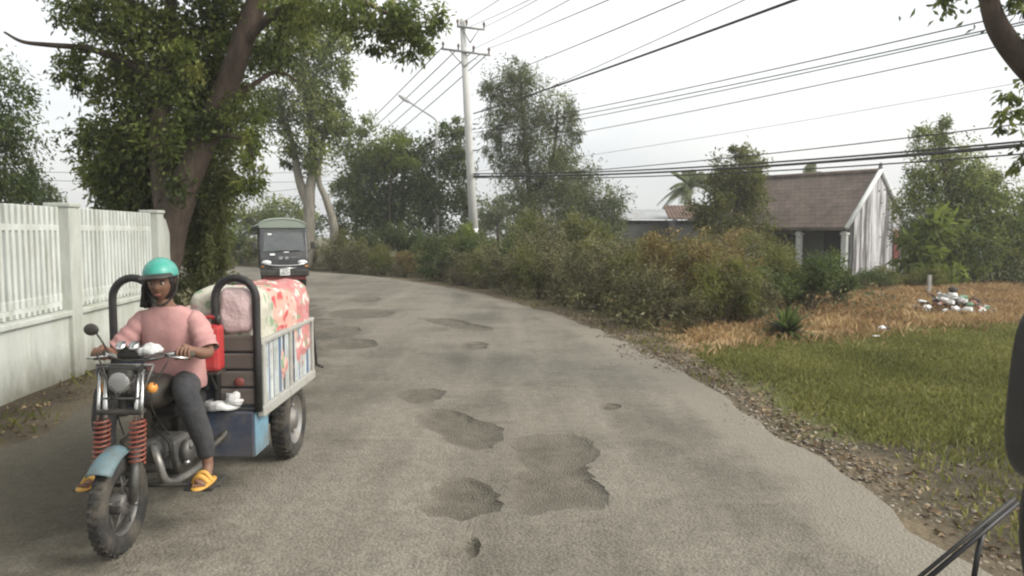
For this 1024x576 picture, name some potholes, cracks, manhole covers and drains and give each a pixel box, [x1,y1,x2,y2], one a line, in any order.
pothole [395,388,446,404]
pothole [425,318,495,332]
pothole [324,309,394,319]
pothole [414,408,504,451]
pothole [460,537,481,558]
pothole [417,478,504,521]
pothole [506,434,611,516]
pothole [318,338,379,349]
pothole [461,341,490,350]
